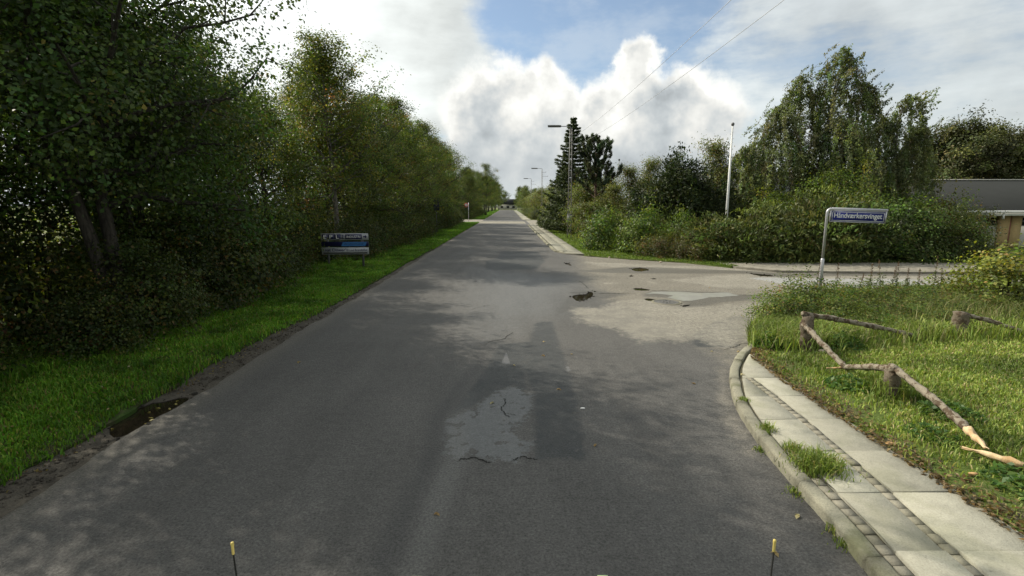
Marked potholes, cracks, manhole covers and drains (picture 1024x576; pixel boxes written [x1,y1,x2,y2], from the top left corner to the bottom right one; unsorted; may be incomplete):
pothole [569,290,596,302]
